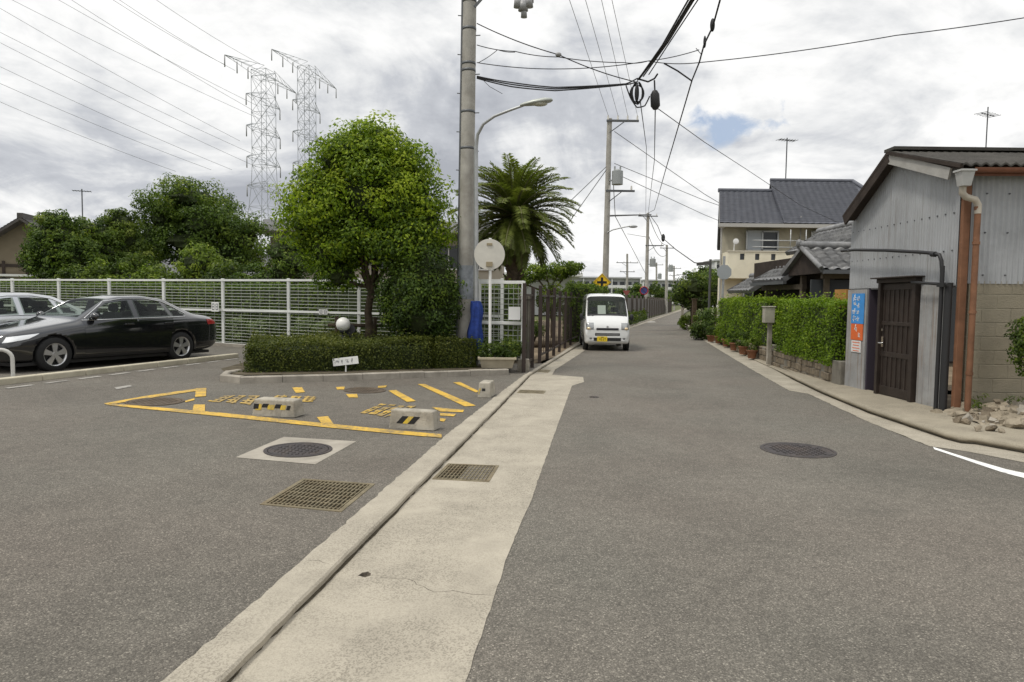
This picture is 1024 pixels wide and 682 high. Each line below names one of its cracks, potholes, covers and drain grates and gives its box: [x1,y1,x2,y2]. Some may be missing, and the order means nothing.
manhole cover [237,437,356,464]
manhole cover [125,397,185,406]
drain grate [432,463,499,482]
manhole cover [760,442,837,458]
drain grate [260,478,375,512]
